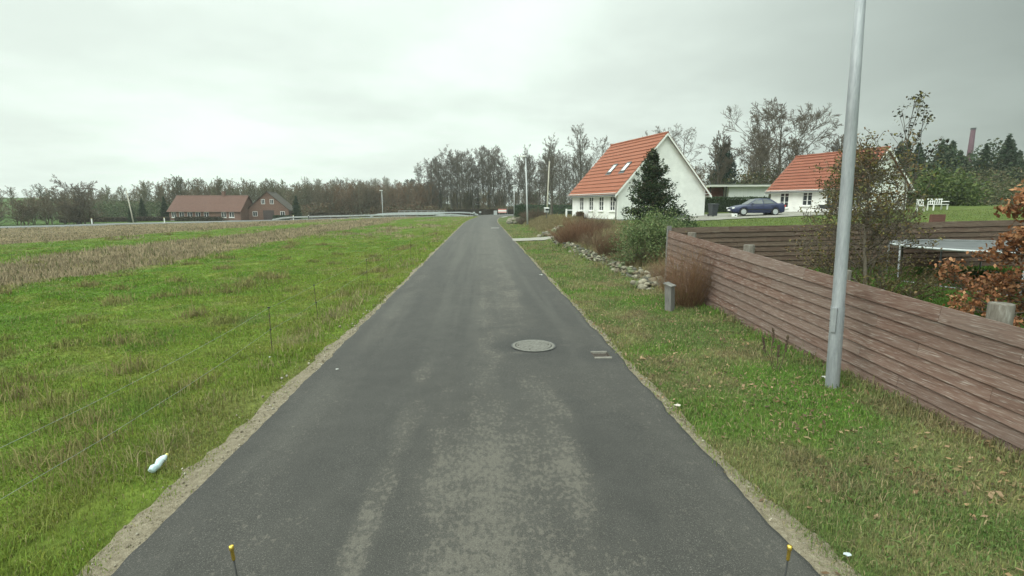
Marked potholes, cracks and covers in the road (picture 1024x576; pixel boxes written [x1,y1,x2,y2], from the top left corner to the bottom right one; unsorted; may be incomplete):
manhole cover [511,340,556,352]
drain grate [591,351,612,359]
